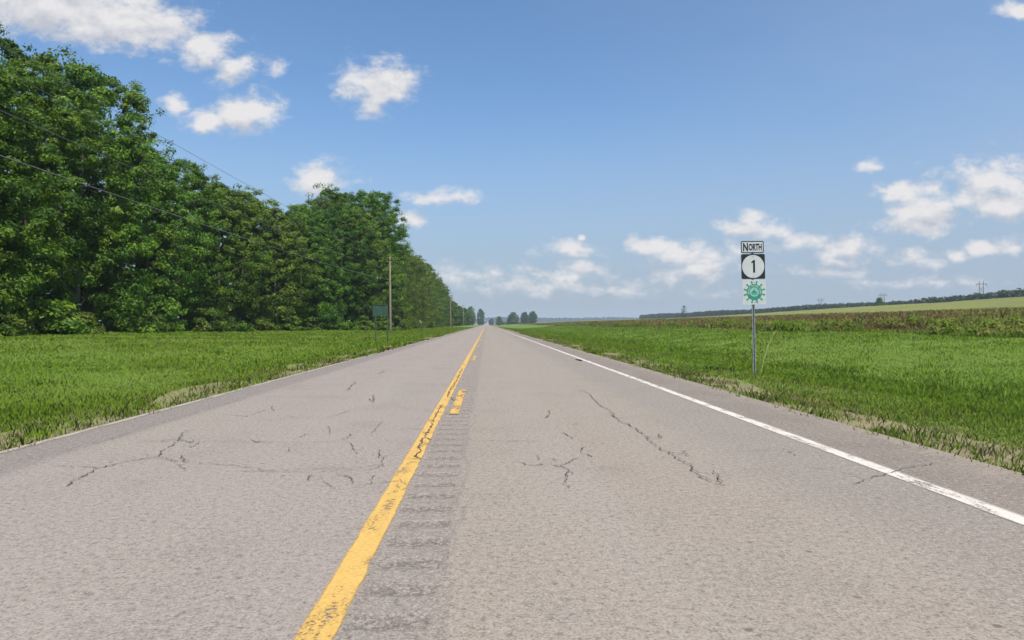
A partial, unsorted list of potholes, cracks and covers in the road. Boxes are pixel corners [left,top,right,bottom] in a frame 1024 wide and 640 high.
crack [15,370,462,488]
crack [581,390,723,483]
crack [520,410,592,487]
